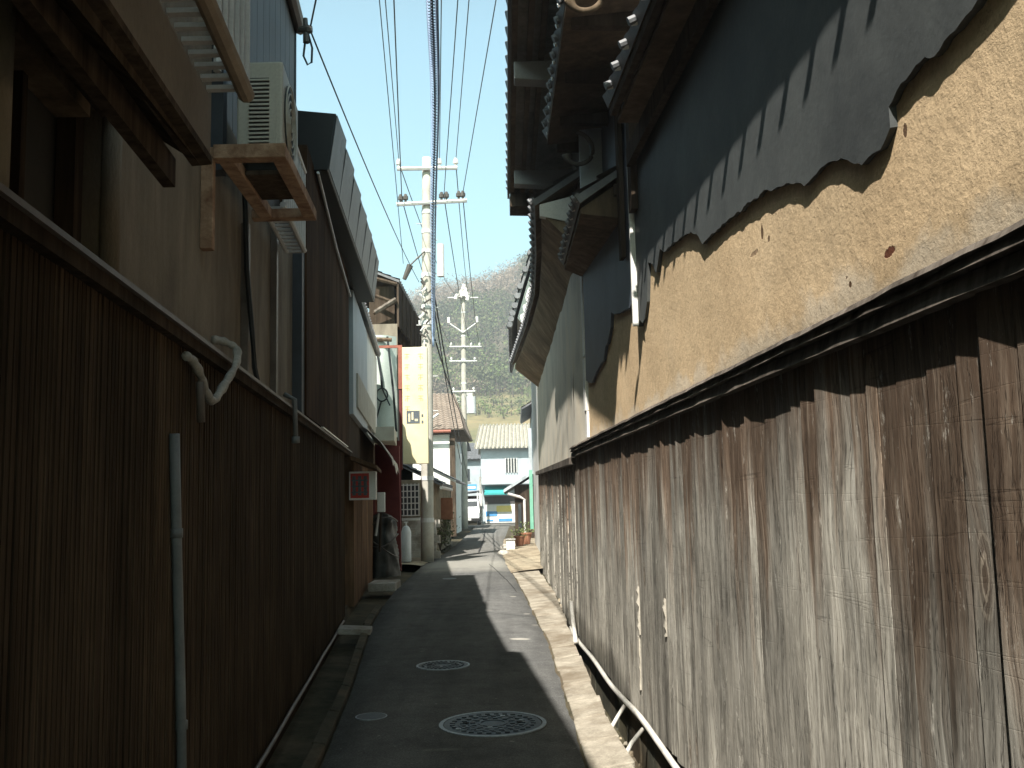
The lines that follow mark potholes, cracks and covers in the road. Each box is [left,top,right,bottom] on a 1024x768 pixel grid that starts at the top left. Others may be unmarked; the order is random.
manhole cover [416,660,470,671]
manhole cover [439,711,547,737]
manhole cover [355,712,387,721]
